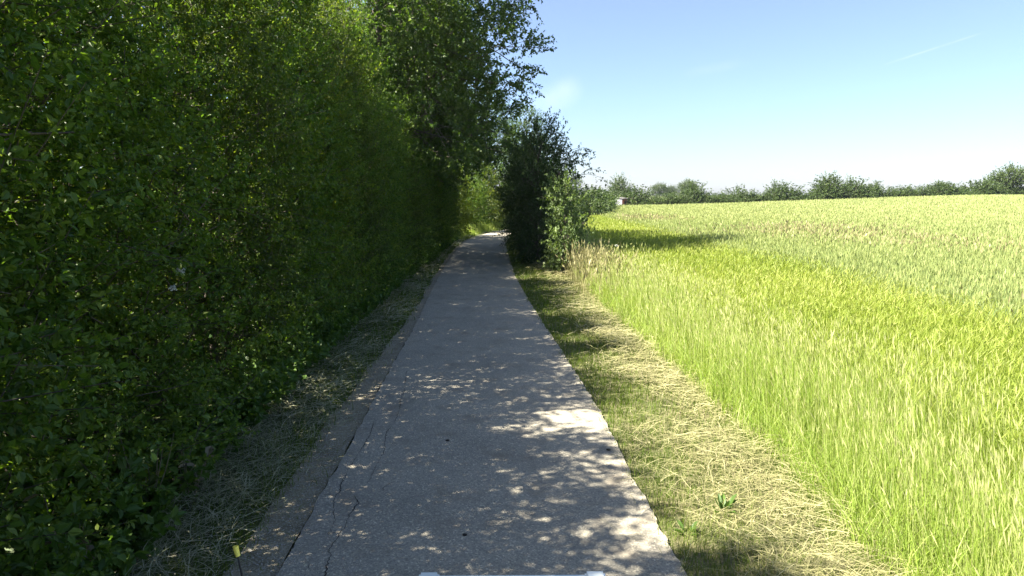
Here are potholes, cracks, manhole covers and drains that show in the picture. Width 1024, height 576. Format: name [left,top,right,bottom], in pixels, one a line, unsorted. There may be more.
crack [305,377,407,576]
